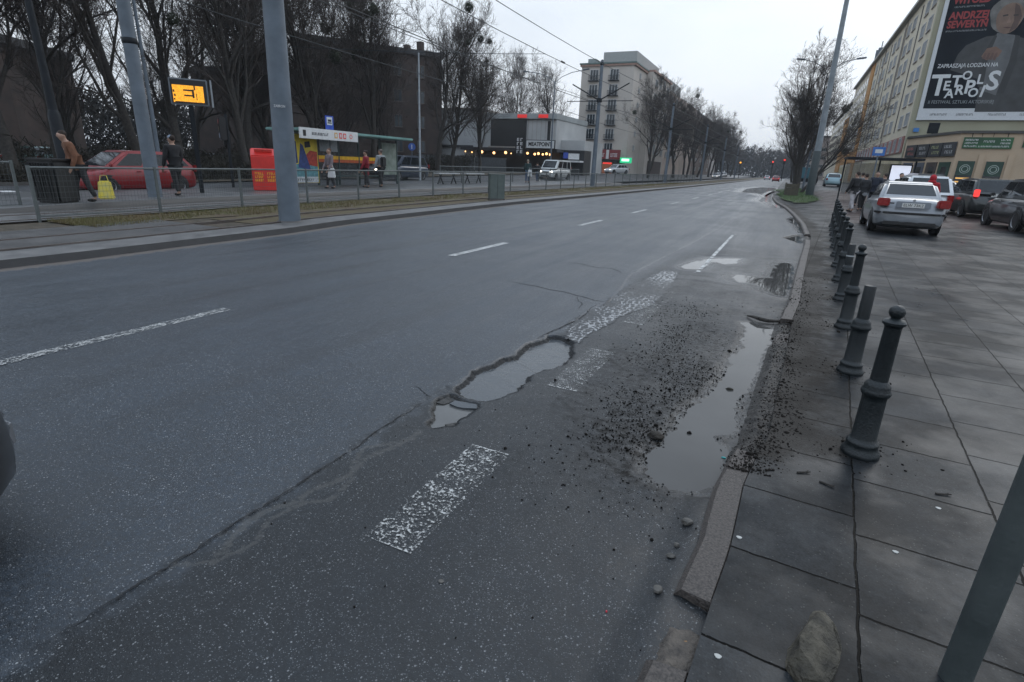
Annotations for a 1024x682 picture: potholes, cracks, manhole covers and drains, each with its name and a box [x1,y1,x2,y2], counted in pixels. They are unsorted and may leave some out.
pothole [427,395,479,428]
pothole [455,336,574,401]
crack [506,262,679,343]
